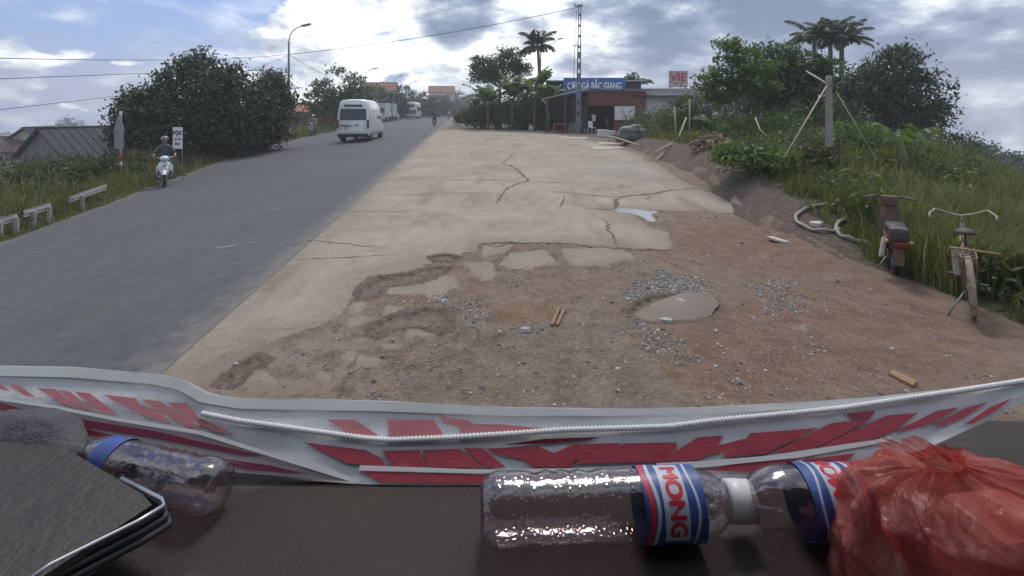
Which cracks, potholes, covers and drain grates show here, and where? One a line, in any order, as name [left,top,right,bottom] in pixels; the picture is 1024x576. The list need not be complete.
pothole [362,306,458,342]
pothole [425,253,463,263]
pothole [352,265,458,302]
pothole [209,352,275,390]
crack [287,240,391,260]
crack [341,154,706,272]
